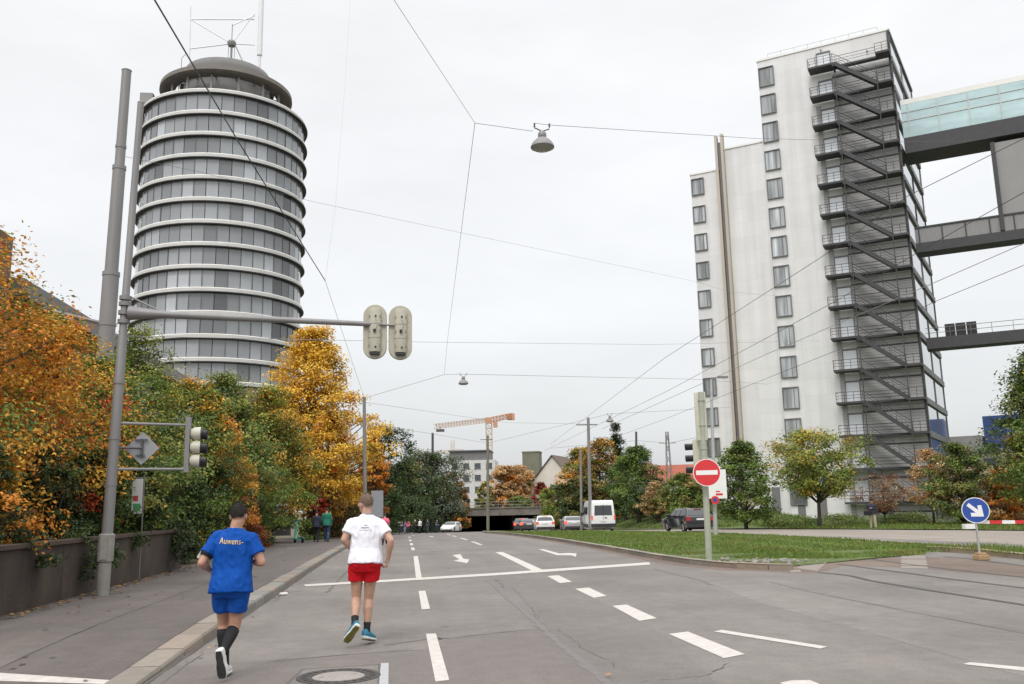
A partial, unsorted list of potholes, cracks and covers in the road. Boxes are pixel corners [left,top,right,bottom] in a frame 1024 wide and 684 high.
crack [495,579,614,667]
manhole cover [286,664,381,684]
